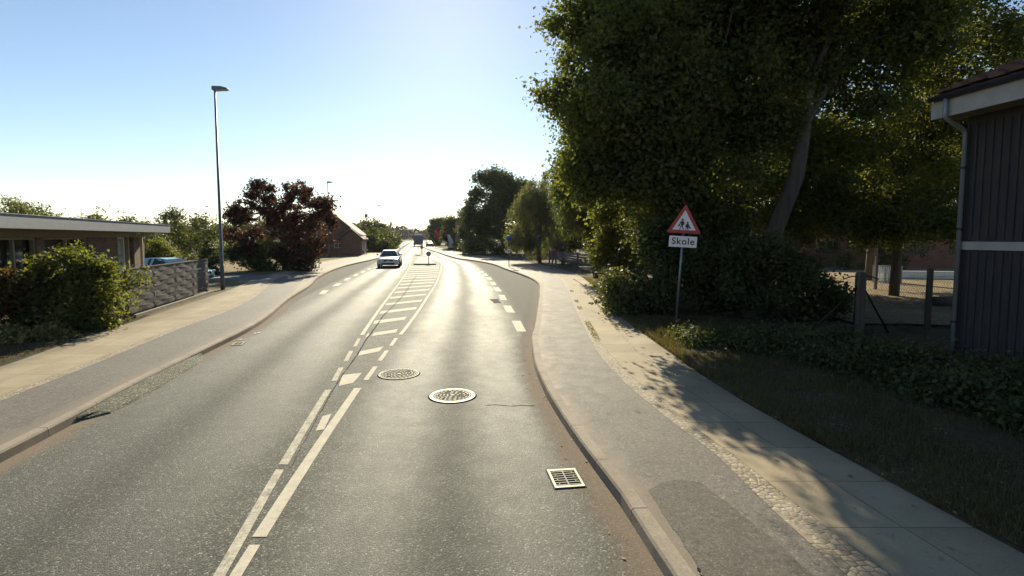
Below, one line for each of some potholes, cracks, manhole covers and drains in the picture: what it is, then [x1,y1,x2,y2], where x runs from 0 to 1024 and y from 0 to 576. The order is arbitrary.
drain grate [545,468,587,490]
manhole cover [377,369,420,380]
manhole cover [428,388,477,404]
